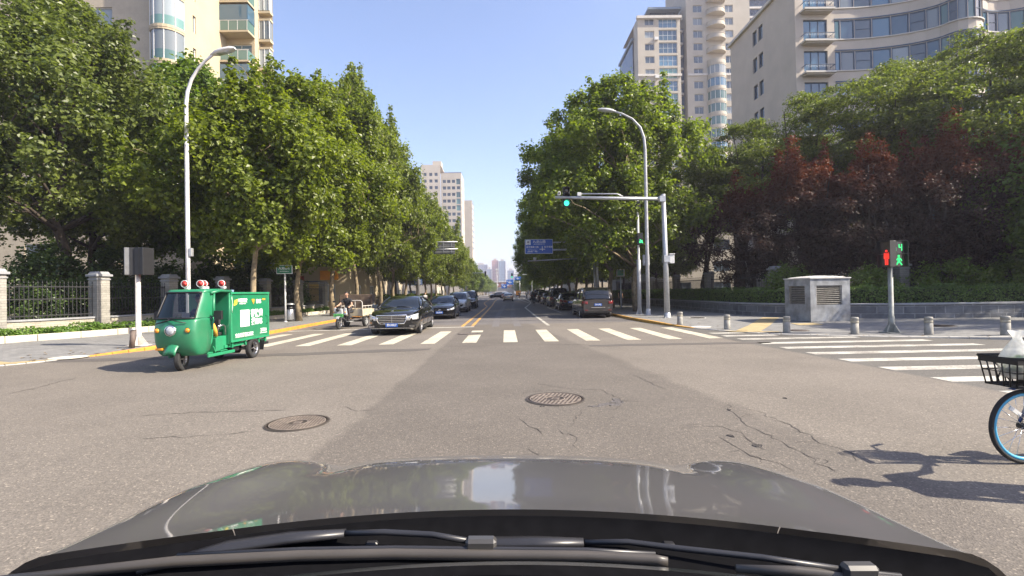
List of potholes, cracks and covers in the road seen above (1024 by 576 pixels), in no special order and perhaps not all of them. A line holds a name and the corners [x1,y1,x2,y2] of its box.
manhole cover [263,415,331,432]
crack [681,405,856,471]
manhole cover [526,392,585,406]
